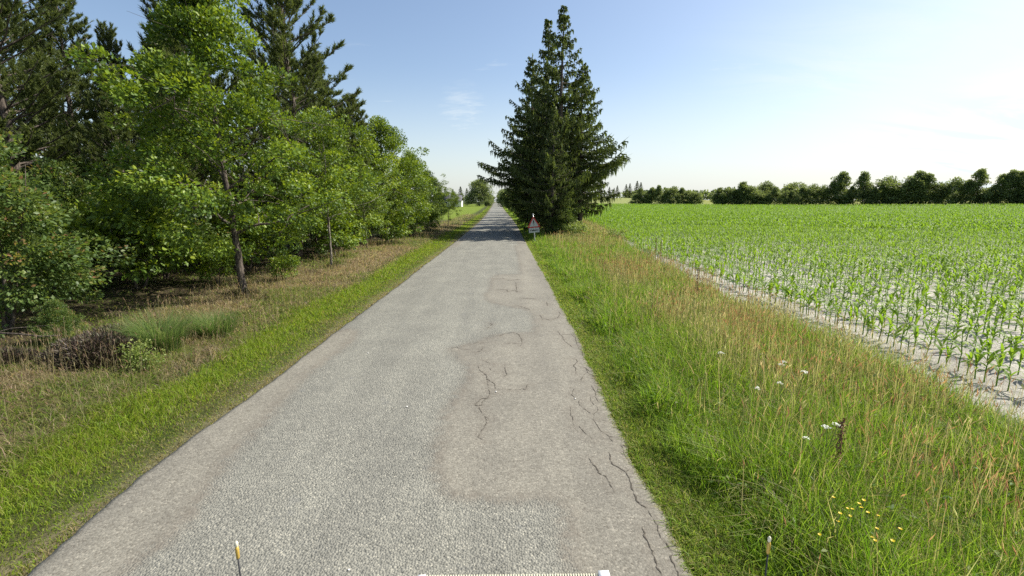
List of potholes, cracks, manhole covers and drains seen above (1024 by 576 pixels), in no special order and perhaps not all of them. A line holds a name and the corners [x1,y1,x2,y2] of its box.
crack [454,325,527,439]
crack [502,278,679,576]
